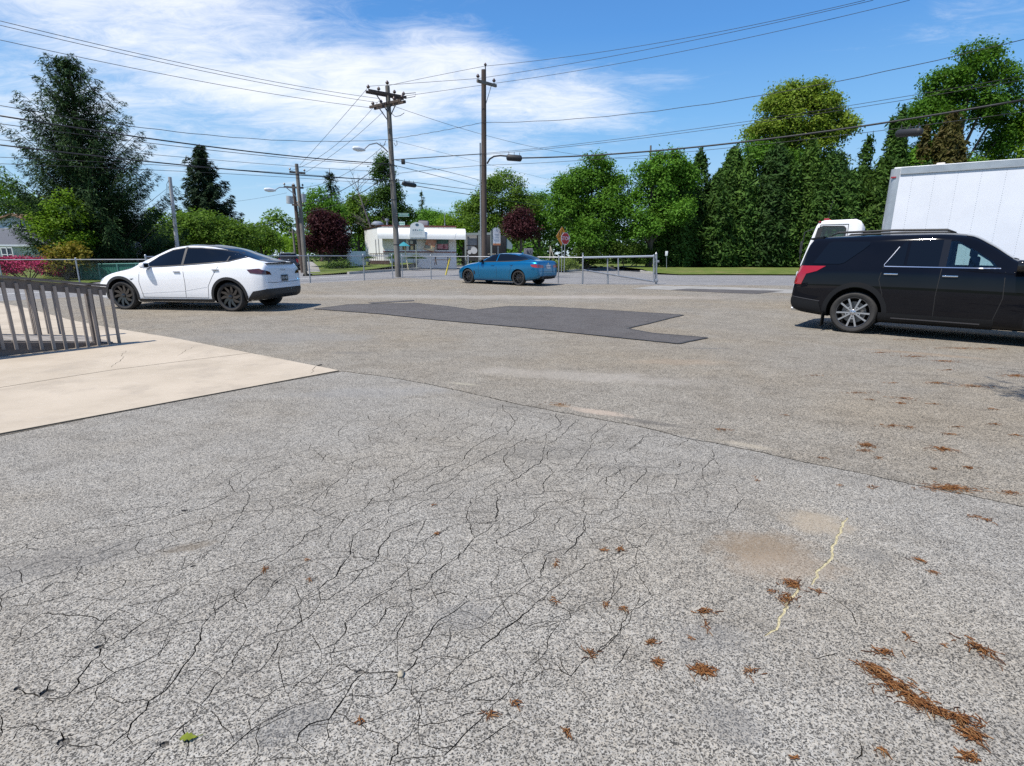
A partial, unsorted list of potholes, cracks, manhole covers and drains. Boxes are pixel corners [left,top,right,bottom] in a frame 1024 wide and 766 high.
crack [0,405,863,765]
